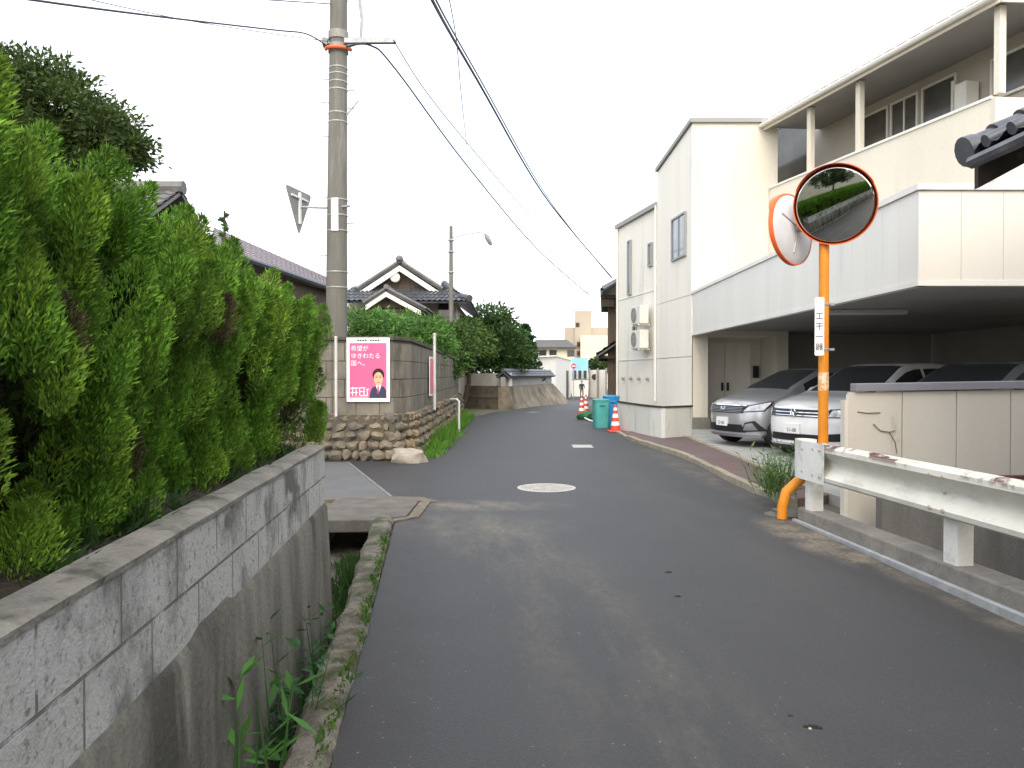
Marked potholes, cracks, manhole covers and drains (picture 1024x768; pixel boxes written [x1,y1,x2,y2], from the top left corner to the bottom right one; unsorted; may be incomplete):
manhole cover [517,483,576,492]
